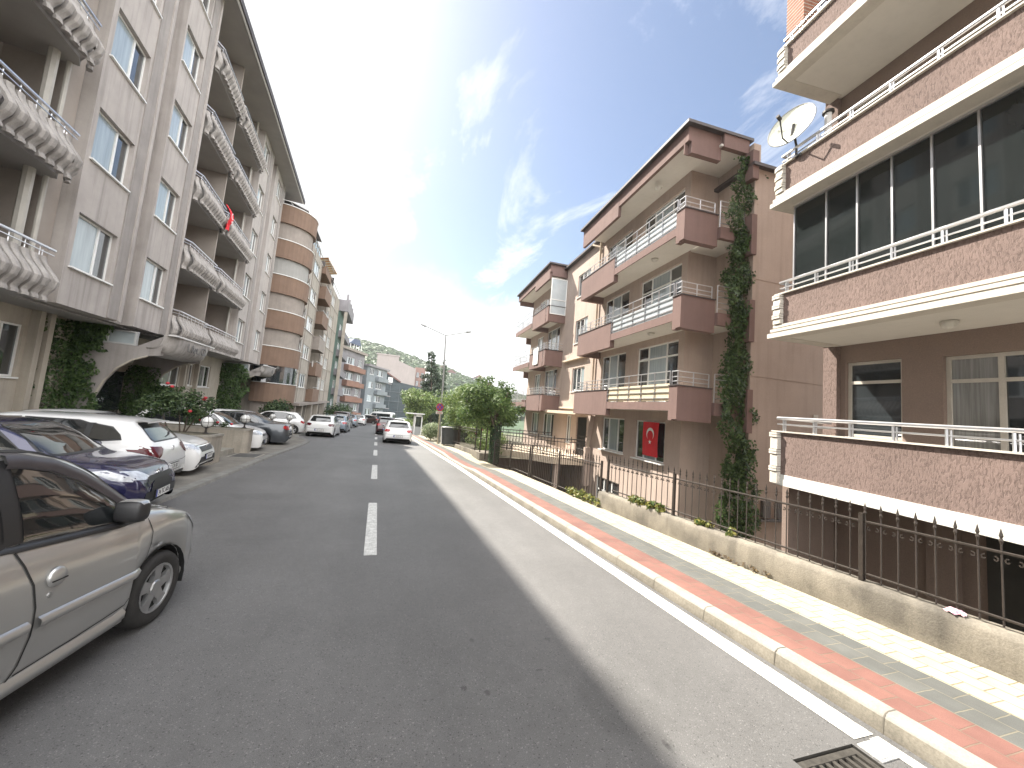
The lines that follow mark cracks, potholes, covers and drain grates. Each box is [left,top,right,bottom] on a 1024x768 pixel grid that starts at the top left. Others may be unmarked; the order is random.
drain grate [793,739,900,768]
